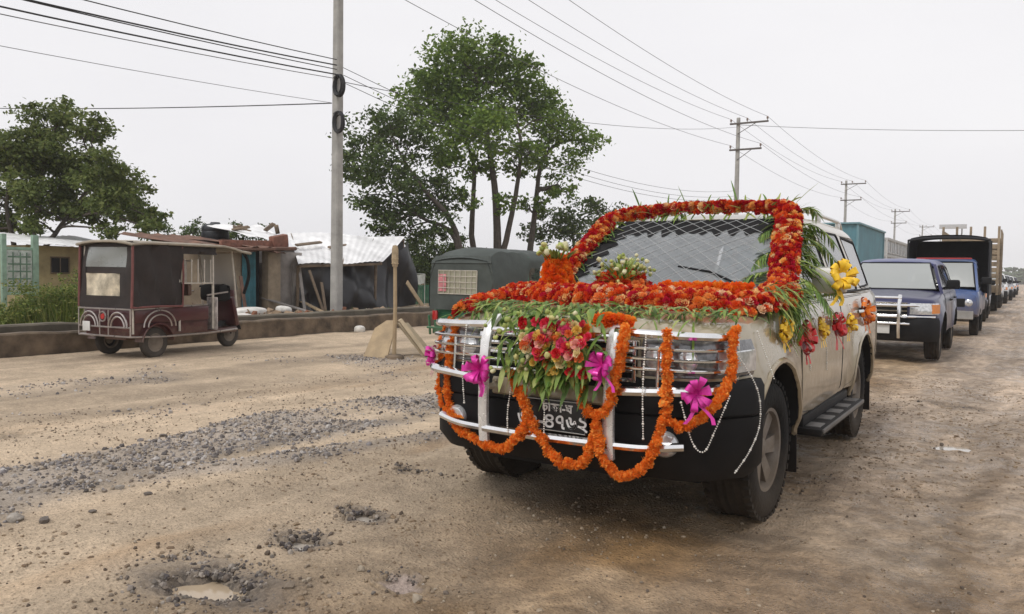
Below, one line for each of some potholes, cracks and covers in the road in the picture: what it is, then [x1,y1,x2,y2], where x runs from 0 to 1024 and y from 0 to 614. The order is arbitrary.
pothole [267,528,335,555]
pothole [110,538,341,613]
pothole [335,505,395,525]
